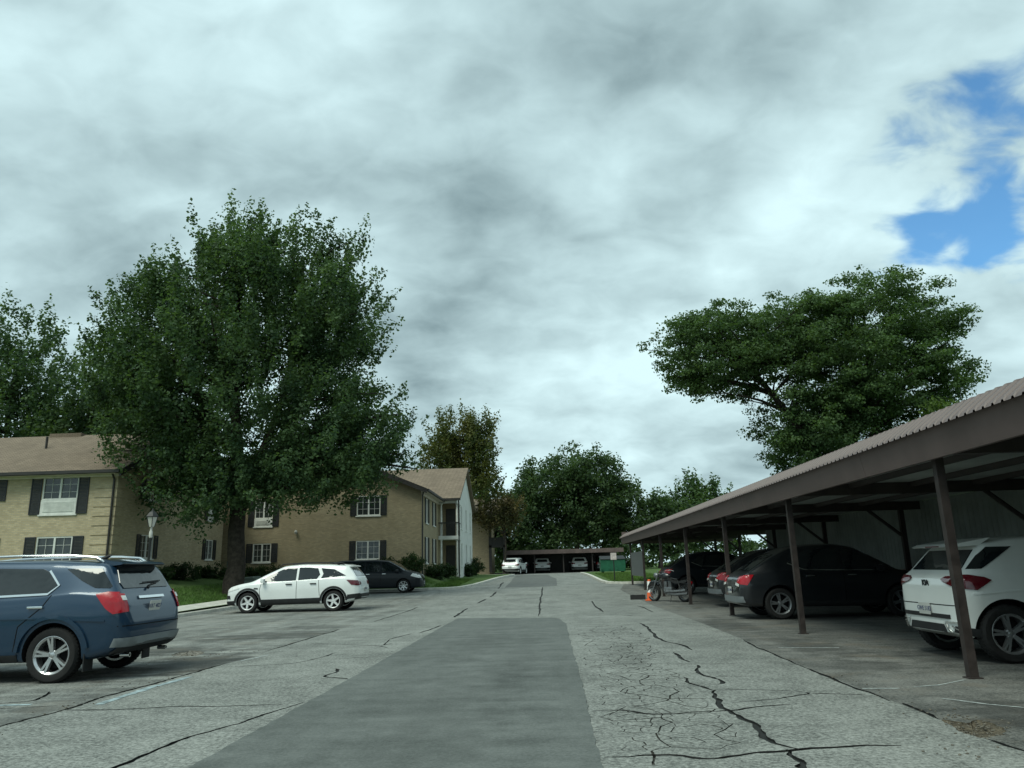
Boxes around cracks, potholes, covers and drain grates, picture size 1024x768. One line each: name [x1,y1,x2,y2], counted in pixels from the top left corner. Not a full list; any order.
crack [93,702,303,768]
crack [576,601,901,768]
crack [0,691,51,709]
crack [235,582,504,679]
